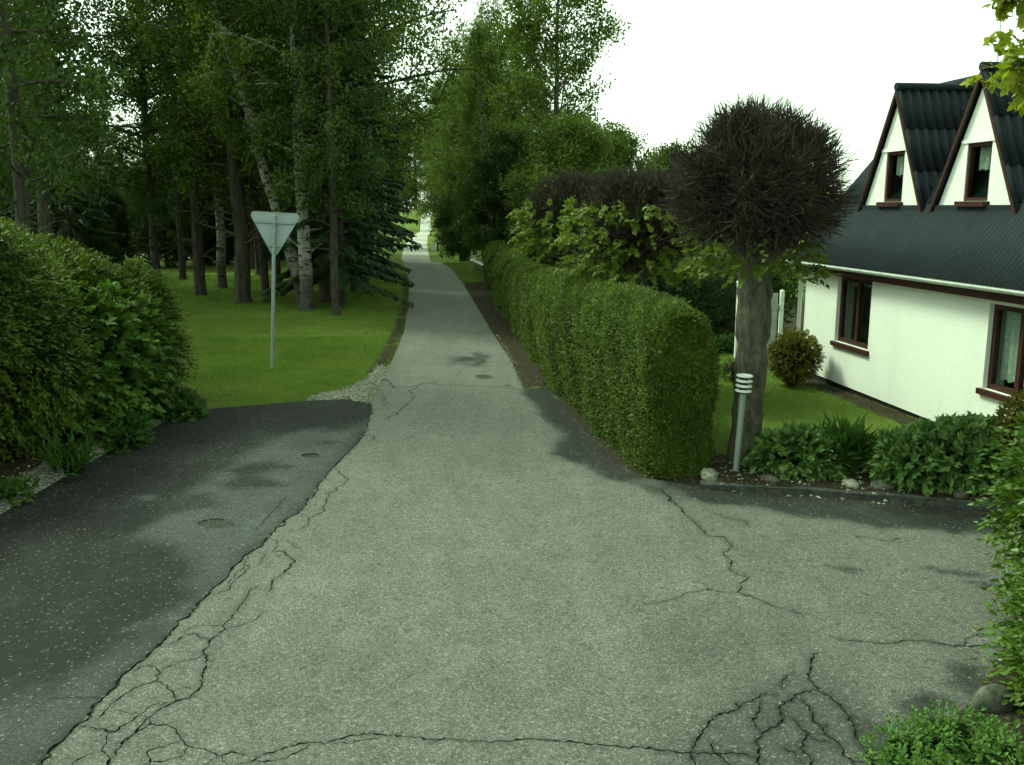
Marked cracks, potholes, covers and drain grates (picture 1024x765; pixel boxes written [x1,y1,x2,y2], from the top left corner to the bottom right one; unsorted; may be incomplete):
crack [240,632,1003,765]
crack [646,491,802,614]
pothole [198,518,234,529]
